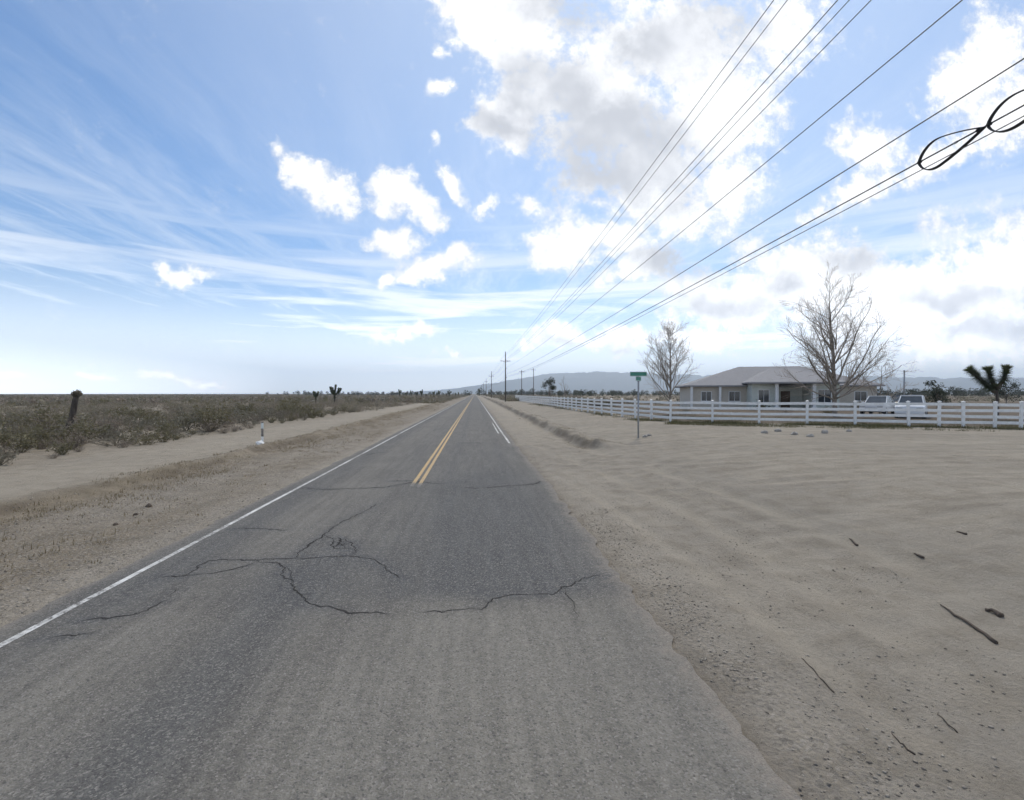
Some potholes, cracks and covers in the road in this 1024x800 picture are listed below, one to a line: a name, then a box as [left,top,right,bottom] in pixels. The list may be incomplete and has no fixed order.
crack [50,504,399,638]
crack [427,575,595,618]
